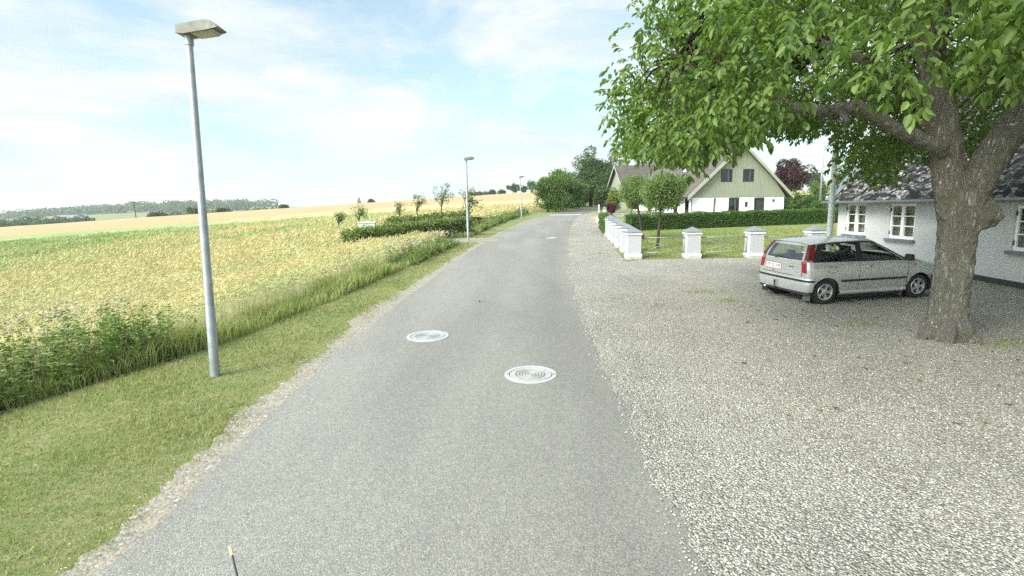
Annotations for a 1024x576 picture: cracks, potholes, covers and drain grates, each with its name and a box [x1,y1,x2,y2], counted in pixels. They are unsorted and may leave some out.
manhole cover [505,366,557,384]
manhole cover [407,330,449,342]
